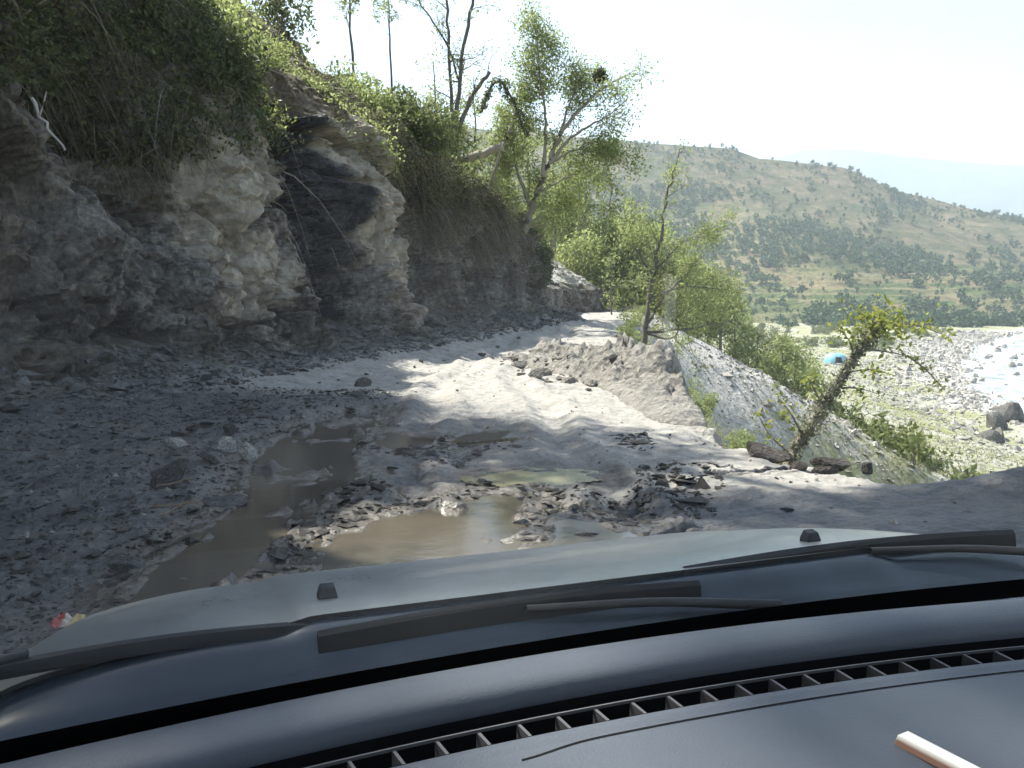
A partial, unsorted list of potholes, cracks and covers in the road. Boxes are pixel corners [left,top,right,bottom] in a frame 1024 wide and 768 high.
pothole [99,412,386,611]
pothole [460,467,602,487]
pothole [294,490,541,571]
pothole [355,430,446,451]
pothole [437,428,522,450]
